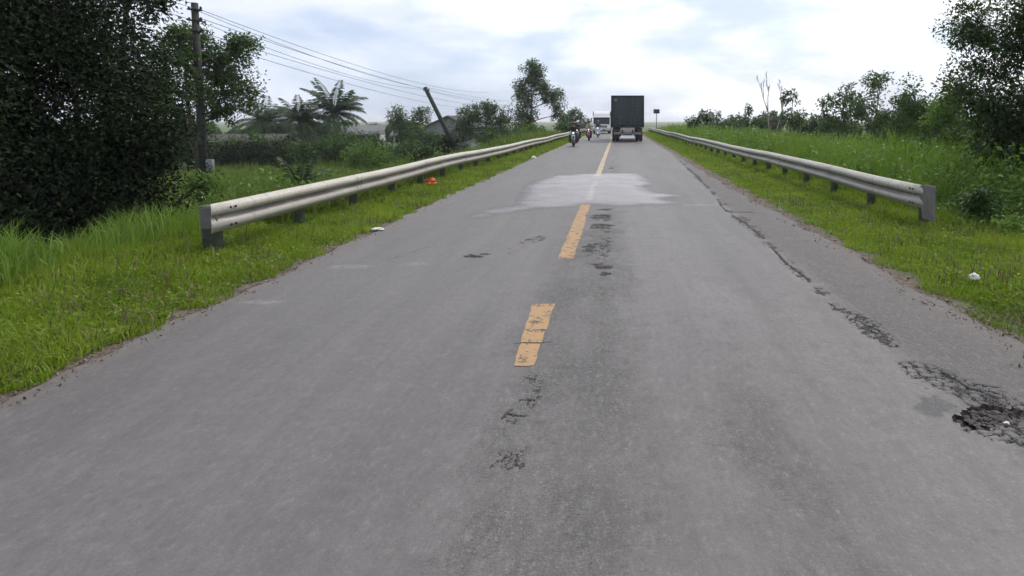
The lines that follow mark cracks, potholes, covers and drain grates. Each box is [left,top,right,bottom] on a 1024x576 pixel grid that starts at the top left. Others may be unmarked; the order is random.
crack [670,154,1024,453]
pothole [952,403,1024,431]
